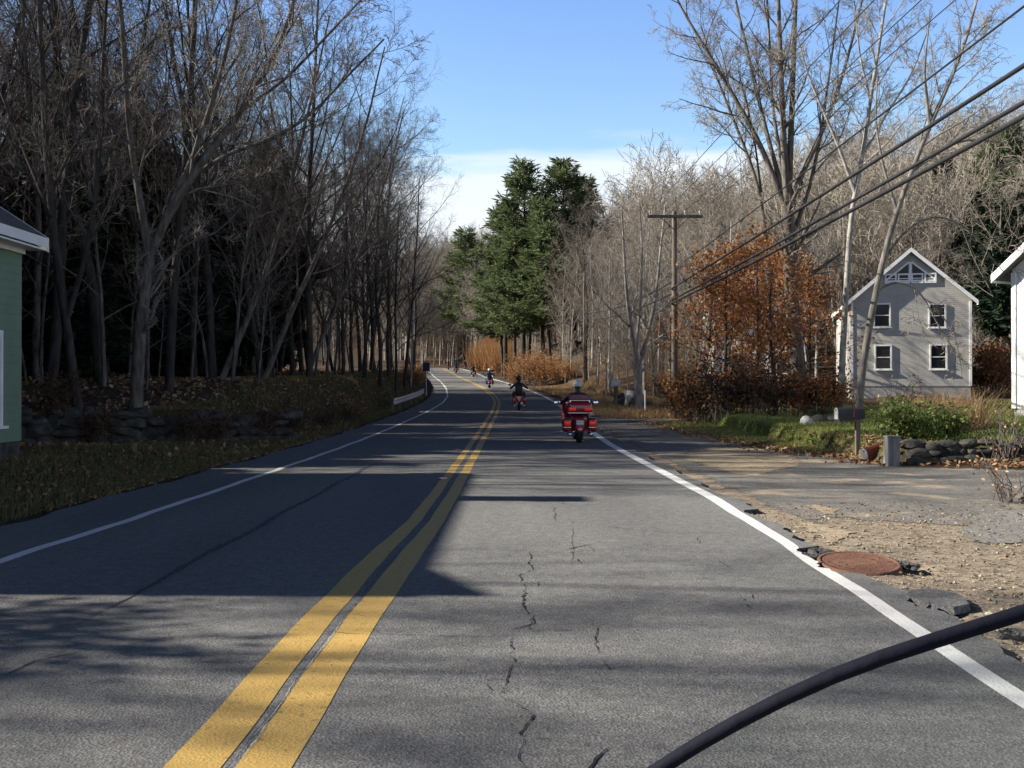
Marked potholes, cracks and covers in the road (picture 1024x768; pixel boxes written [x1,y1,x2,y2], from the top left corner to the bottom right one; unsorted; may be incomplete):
manhole cover [817,551,903,576]
crack [588,746,612,768]
